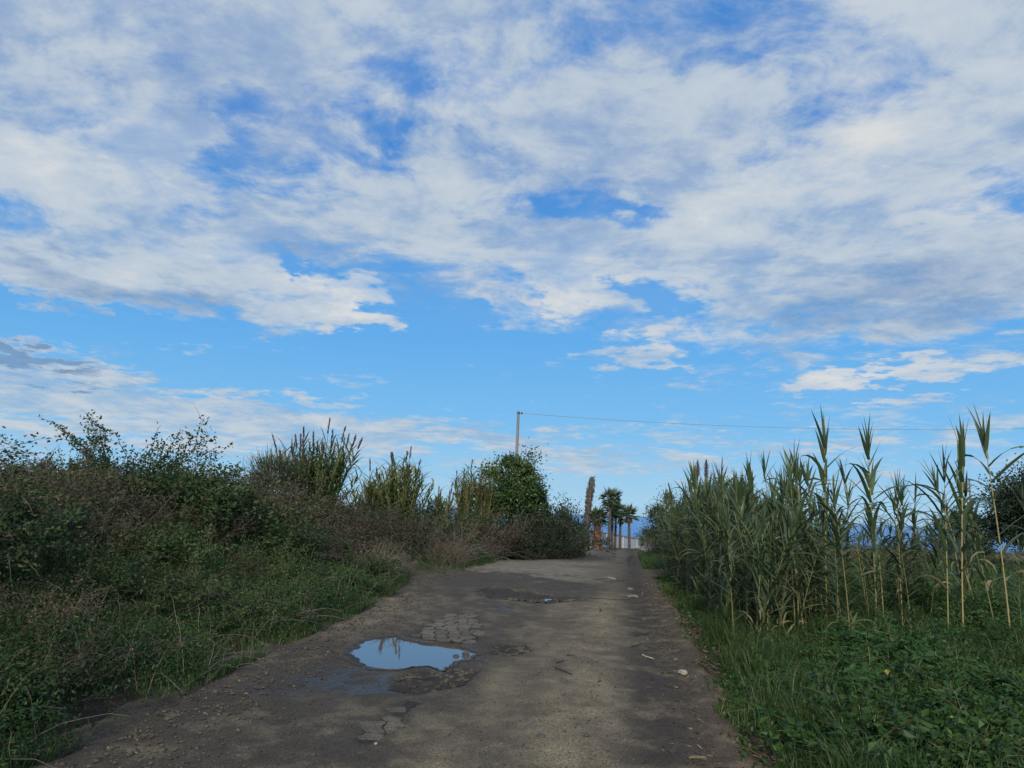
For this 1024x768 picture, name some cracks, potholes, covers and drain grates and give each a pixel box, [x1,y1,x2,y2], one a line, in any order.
pothole [474,585,588,603]
crack [357,613,532,743]
pothole [334,634,486,672]
